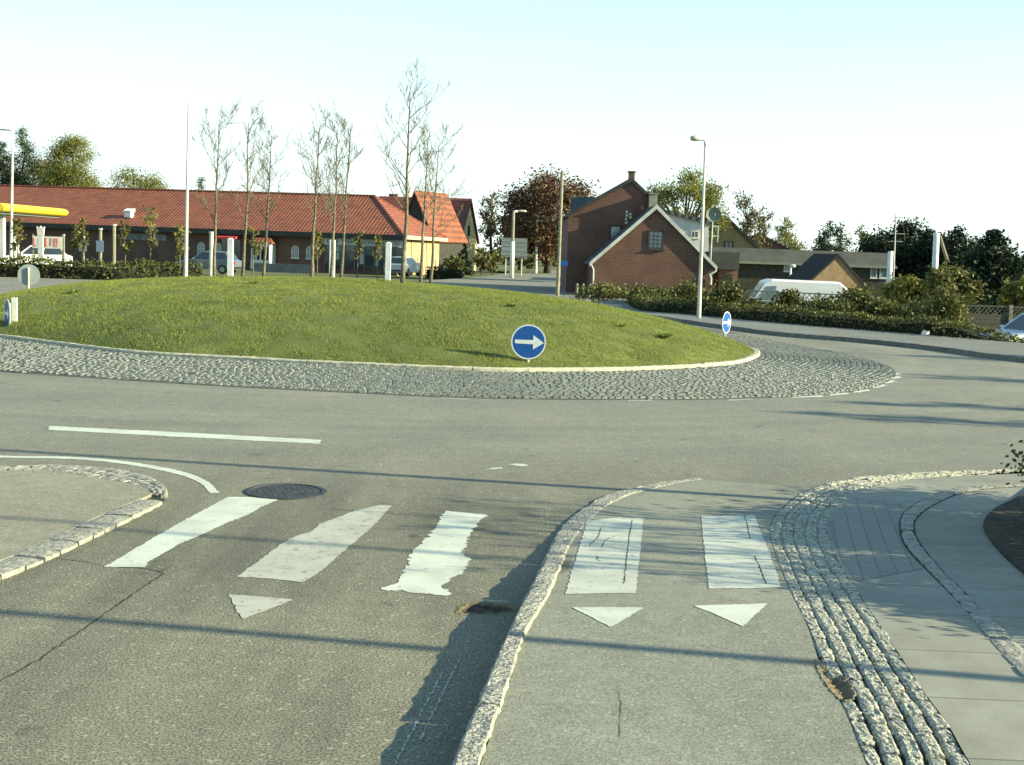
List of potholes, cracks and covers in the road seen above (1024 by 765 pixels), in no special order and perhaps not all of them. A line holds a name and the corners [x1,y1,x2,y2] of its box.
crack [0,558,164,681]
pothole [454,602,519,615]
crack [589,521,632,583]
manhole cover [245,483,327,500]
pothole [814,658,857,701]
